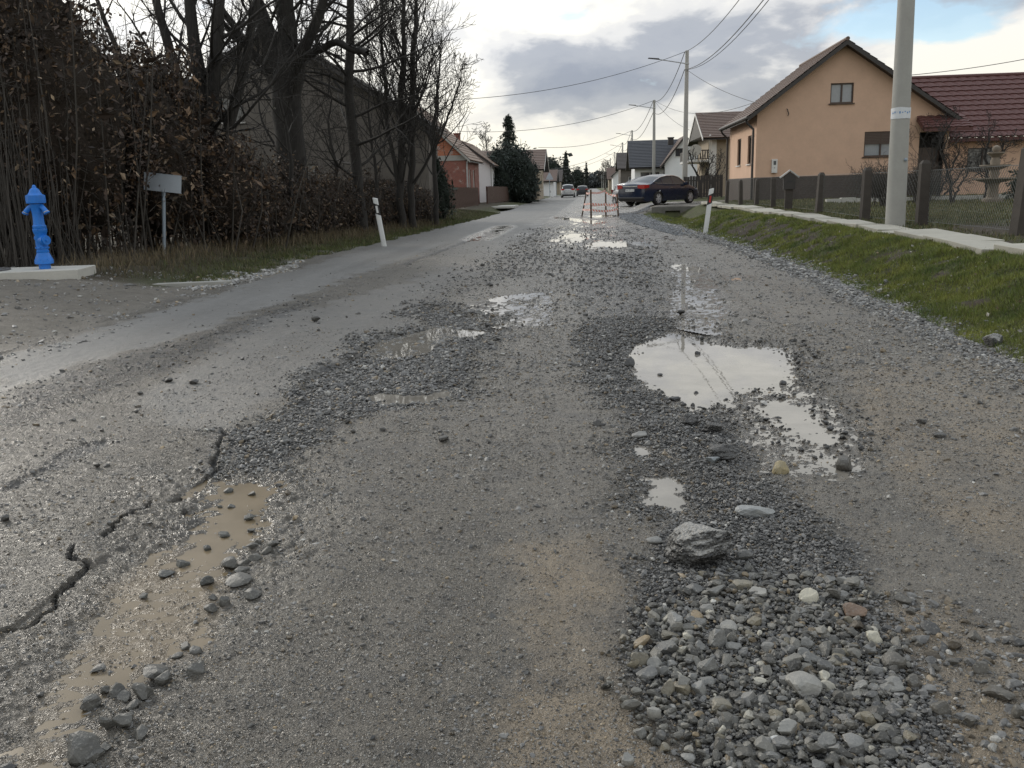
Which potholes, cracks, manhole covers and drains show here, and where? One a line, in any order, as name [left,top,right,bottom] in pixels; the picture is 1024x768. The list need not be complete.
crack [101,503,149,538]
pothole [294,304,491,415]
pothole [475,218,519,241]
pothole [614,319,859,463]
crack [170,430,229,515]
crack [2,544,91,634]
pothole [17,416,319,768]
pothole [623,438,696,525]
pothole [540,231,653,254]
